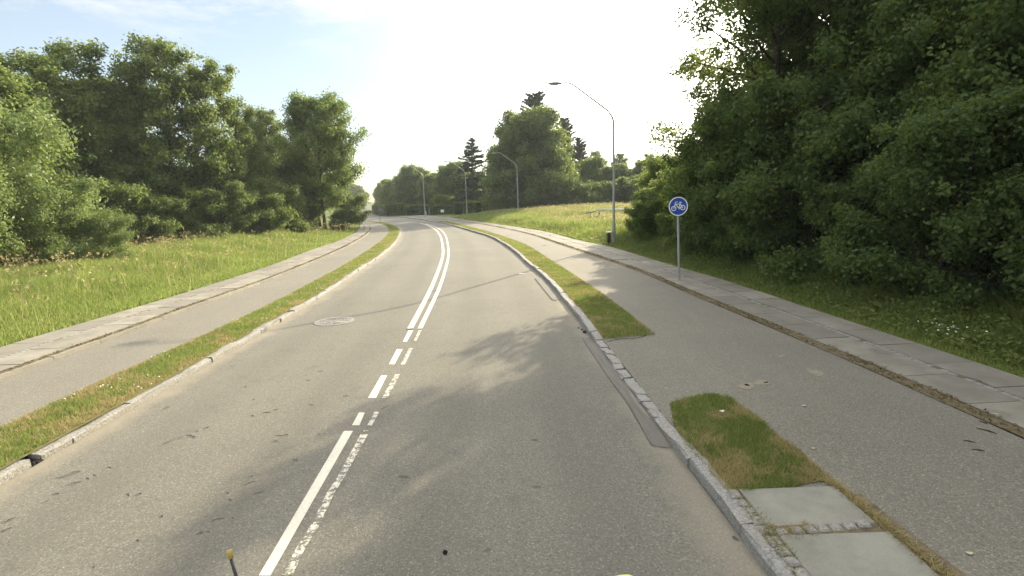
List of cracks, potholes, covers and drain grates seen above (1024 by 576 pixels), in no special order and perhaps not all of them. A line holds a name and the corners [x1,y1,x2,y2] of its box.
manhole cover [314,317,354,326]
